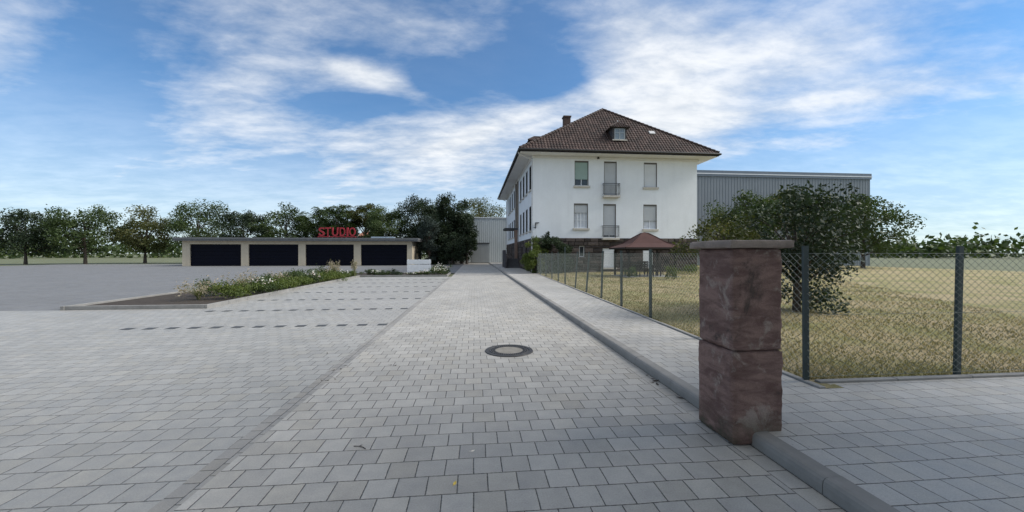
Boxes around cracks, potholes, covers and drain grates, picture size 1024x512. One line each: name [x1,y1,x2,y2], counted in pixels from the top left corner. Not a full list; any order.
manhole cover [485,344,533,357]
